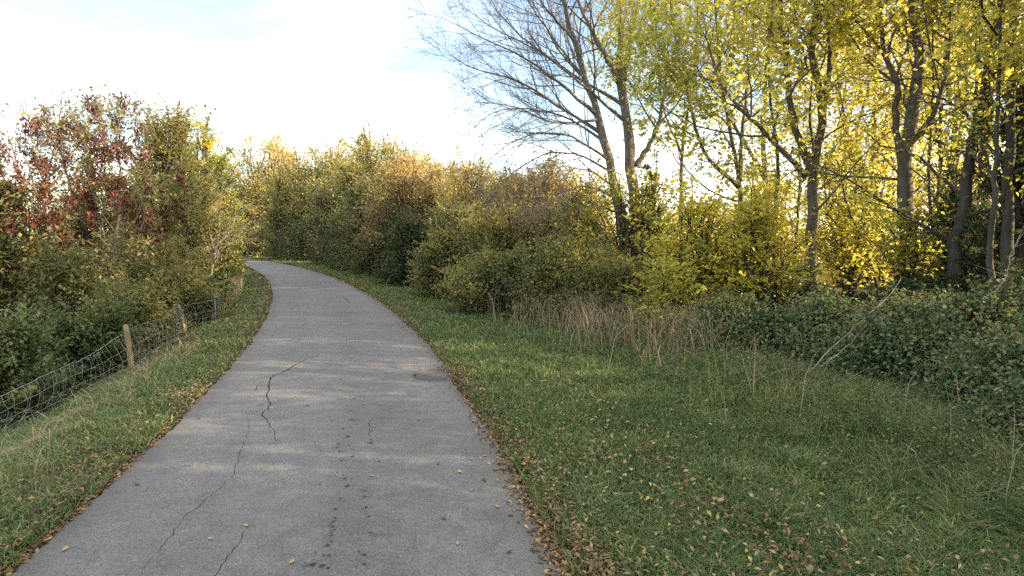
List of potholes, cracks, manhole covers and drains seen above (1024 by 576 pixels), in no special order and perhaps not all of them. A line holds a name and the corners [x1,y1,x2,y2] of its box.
crack [141,353,320,575]
